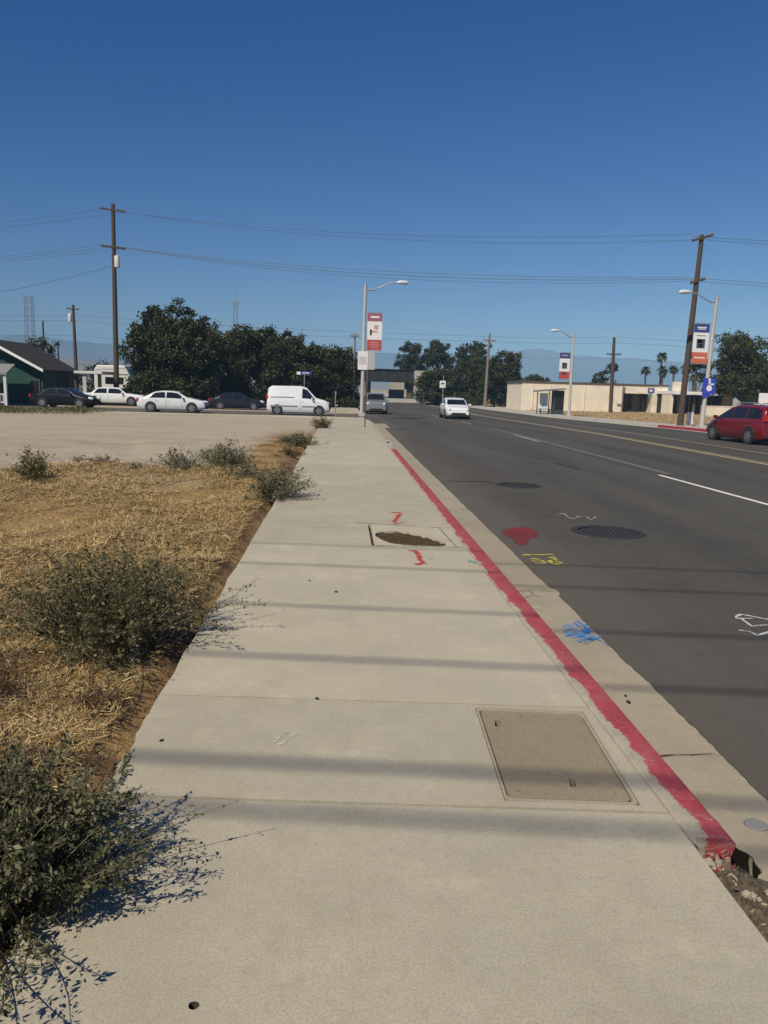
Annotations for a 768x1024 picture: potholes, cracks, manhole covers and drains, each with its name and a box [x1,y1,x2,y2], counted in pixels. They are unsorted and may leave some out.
pothole [369,532,446,546]
utility cover [476,709,638,805]
pothole [731,847,761,878]
